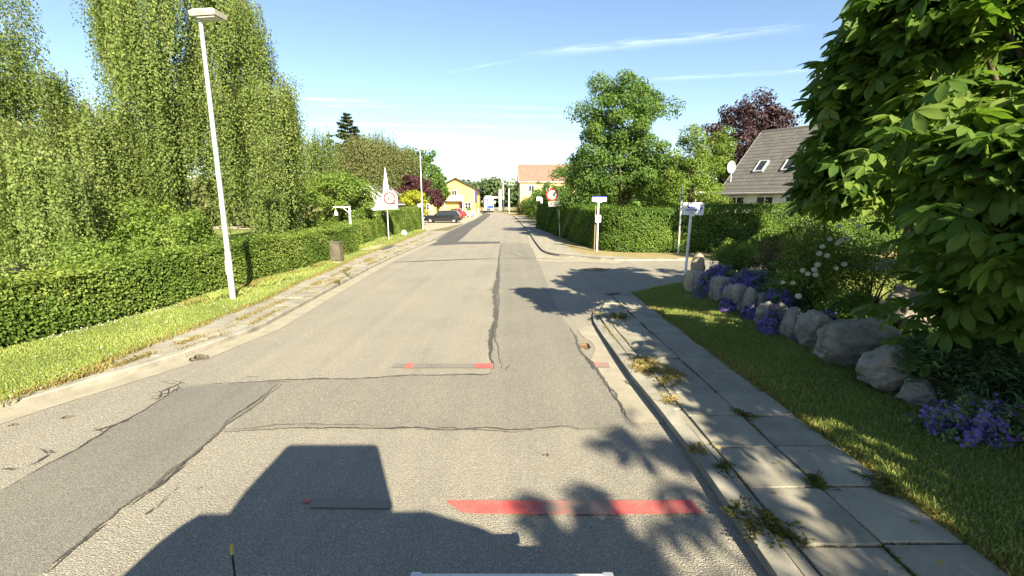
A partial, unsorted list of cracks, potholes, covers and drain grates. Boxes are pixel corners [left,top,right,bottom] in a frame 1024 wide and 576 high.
crack [2,328,632,573]
